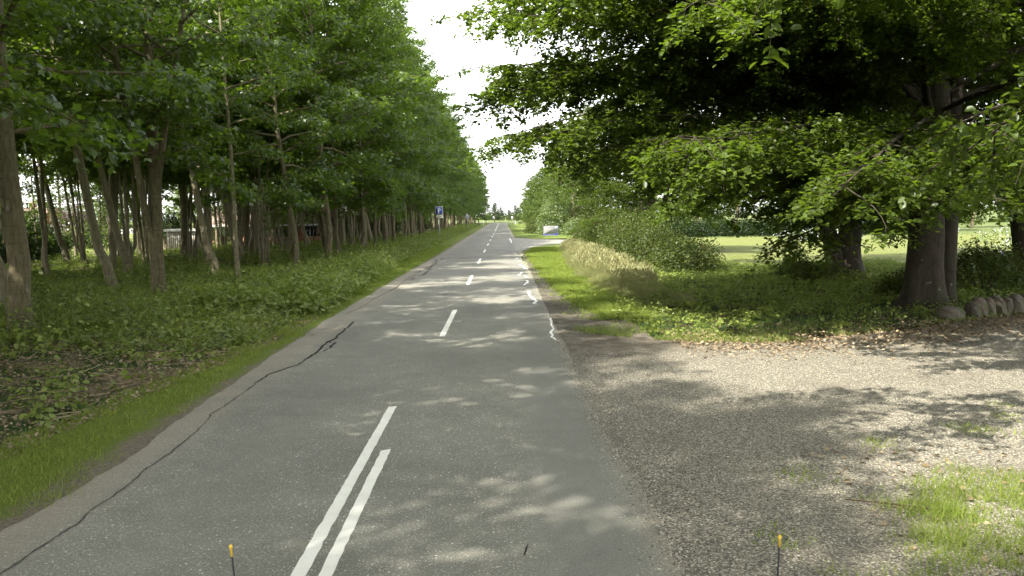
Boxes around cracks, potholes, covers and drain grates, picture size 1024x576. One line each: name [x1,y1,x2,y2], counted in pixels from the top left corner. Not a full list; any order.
crack [346,258,443,314]
